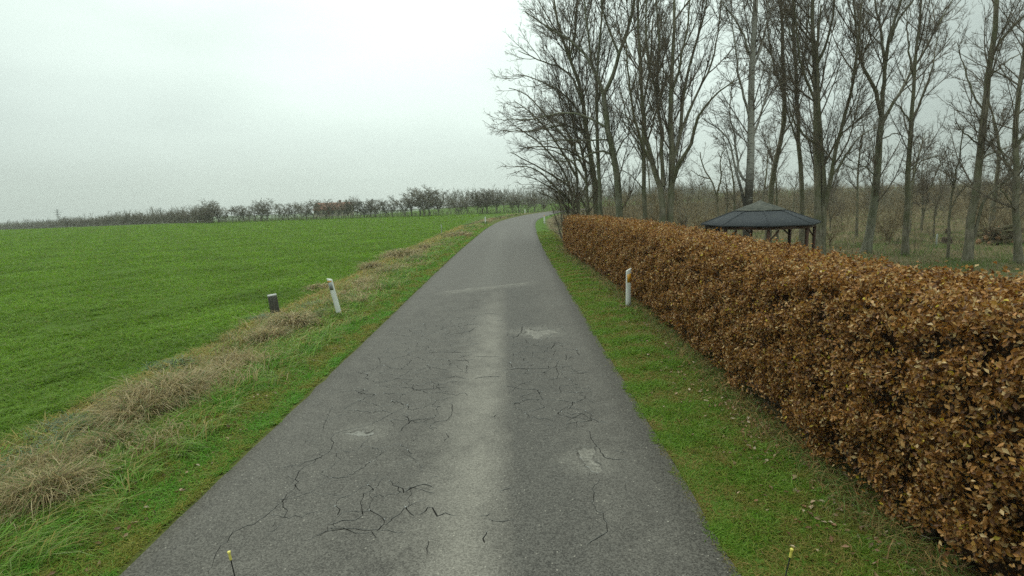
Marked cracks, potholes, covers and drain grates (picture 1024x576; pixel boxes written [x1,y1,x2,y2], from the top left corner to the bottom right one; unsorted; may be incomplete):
crack [208,313,628,573]
